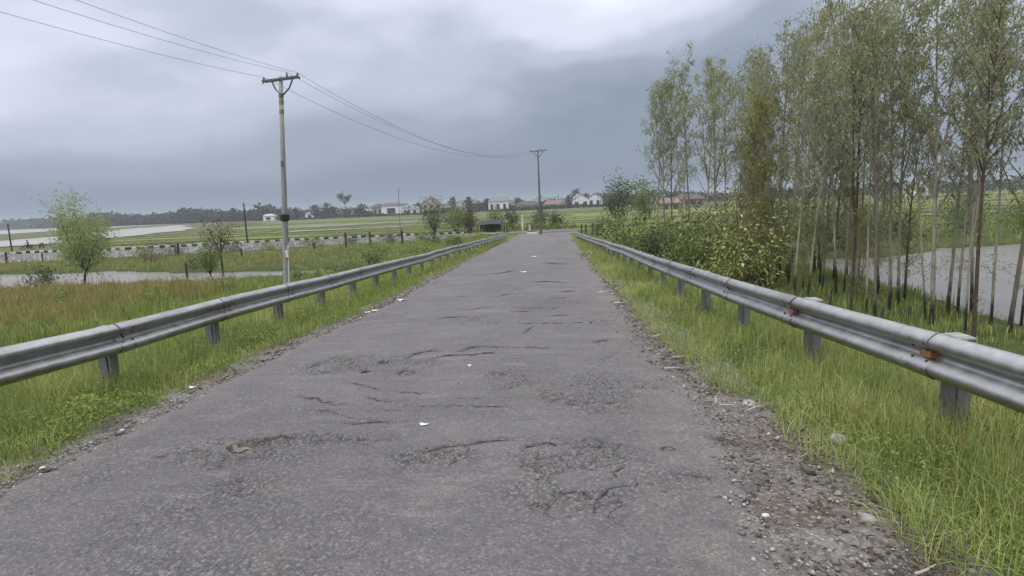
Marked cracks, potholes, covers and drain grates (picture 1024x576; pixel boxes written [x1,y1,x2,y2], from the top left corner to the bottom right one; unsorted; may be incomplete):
crack [291,355,374,375]
crack [398,281,659,414]
crack [443,270,513,323]
crack [506,438,676,524]
pothole [227,441,262,453]
